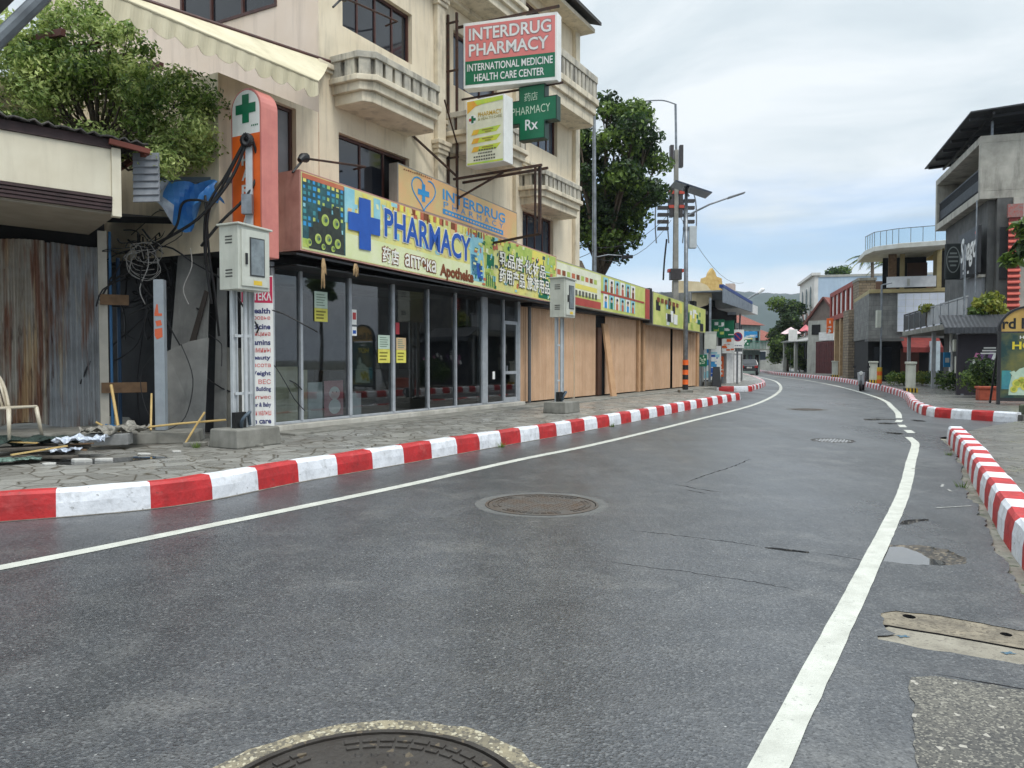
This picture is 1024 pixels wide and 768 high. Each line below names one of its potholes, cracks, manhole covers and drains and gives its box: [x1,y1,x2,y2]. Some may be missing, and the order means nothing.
manhole cover [213,720,541,768]
manhole cover [475,492,609,518]
crack [607,561,805,593]
pothole [882,545,967,565]
